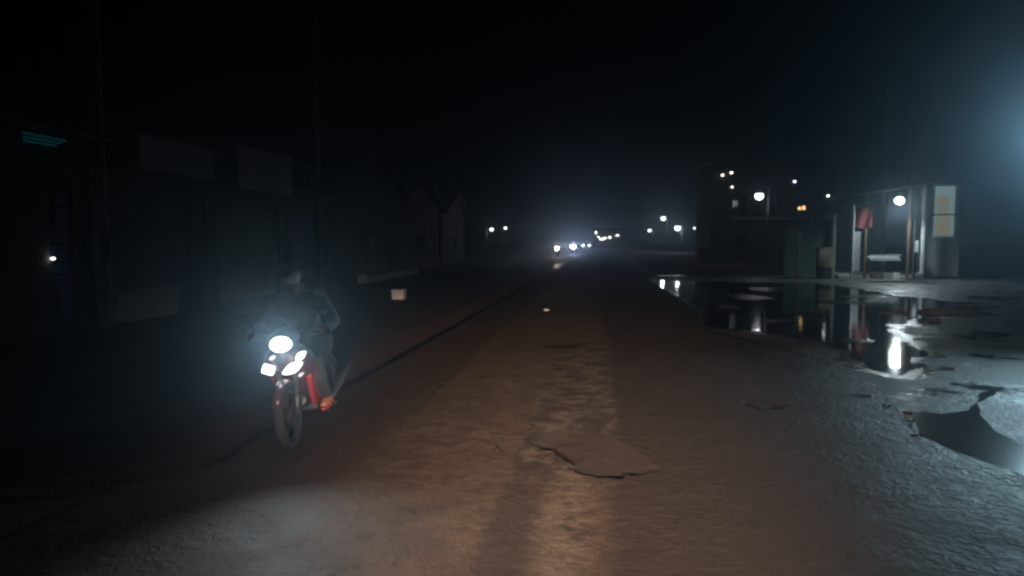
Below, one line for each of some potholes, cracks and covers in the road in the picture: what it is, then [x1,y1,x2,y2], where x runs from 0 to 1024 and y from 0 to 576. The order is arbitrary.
pothole [739,396,791,411]
